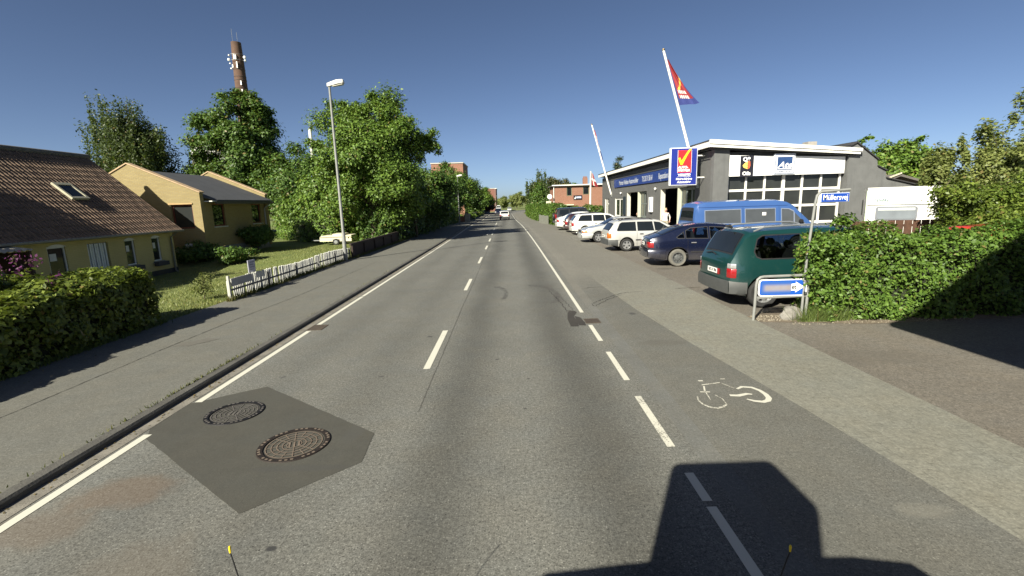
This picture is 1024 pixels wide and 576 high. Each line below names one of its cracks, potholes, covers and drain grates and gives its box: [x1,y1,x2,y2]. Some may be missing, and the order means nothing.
manhole cover [203,401,265,426]
manhole cover [256,428,331,463]
